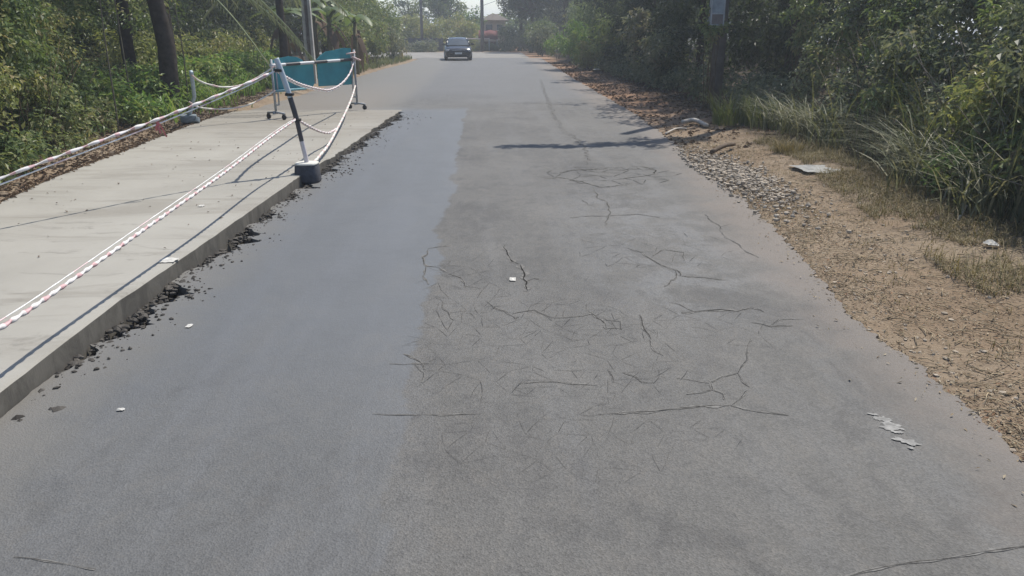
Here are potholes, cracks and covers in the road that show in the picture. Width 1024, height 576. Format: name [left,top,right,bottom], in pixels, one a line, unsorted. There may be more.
crack [705,214,758,257]
crack [579,232,734,286]
crack [13,556,96,570]
crack [845,545,1024,576]
crack [535,85,681,225]
crack [373,245,801,482]
